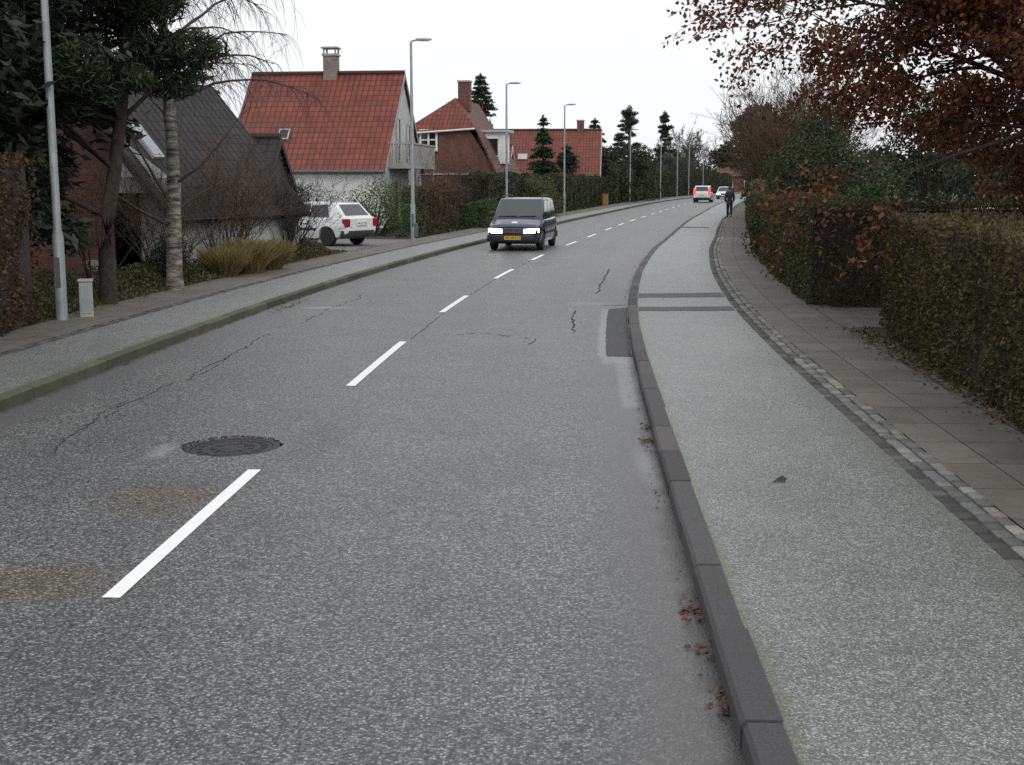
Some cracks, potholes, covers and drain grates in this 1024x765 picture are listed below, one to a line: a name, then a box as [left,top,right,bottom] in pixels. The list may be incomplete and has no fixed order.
crack [47,333,273,453]
manhole cover [183,438,280,457]
